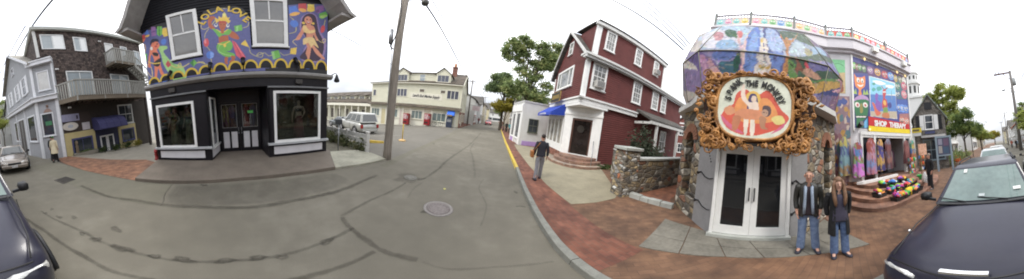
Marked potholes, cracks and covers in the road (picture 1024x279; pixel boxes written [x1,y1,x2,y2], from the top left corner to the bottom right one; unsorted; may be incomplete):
manhole cover [423,201,453,217]
